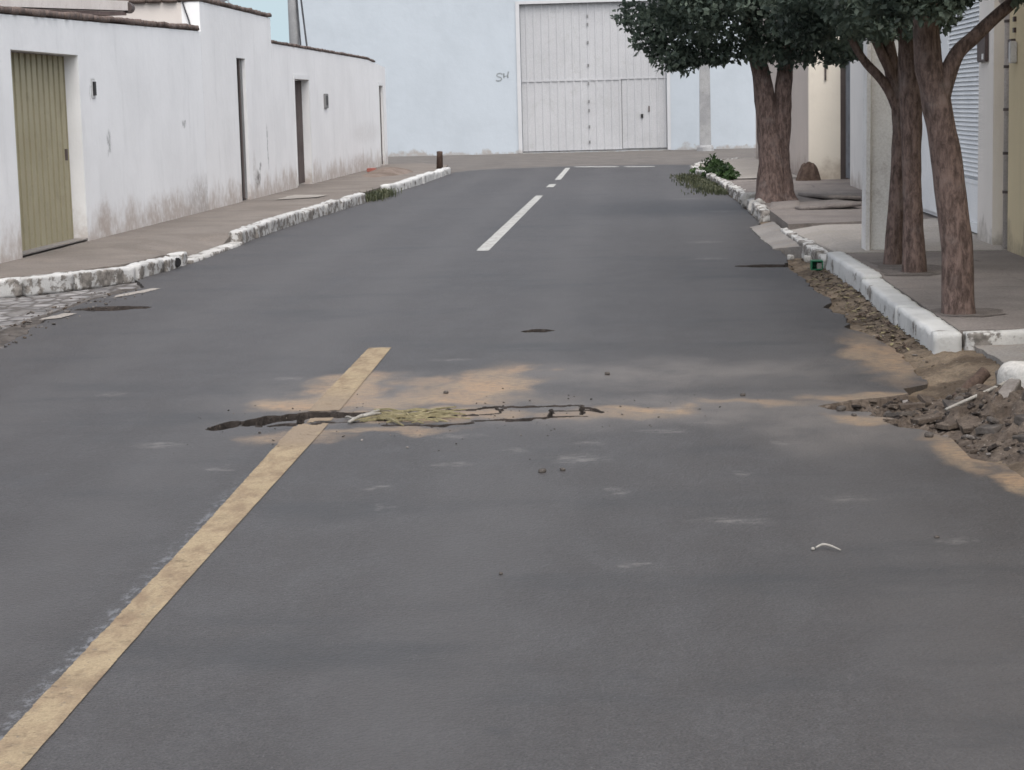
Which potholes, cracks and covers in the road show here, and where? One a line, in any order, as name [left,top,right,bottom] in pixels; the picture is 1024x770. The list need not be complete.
crack [187,388,837,460]
